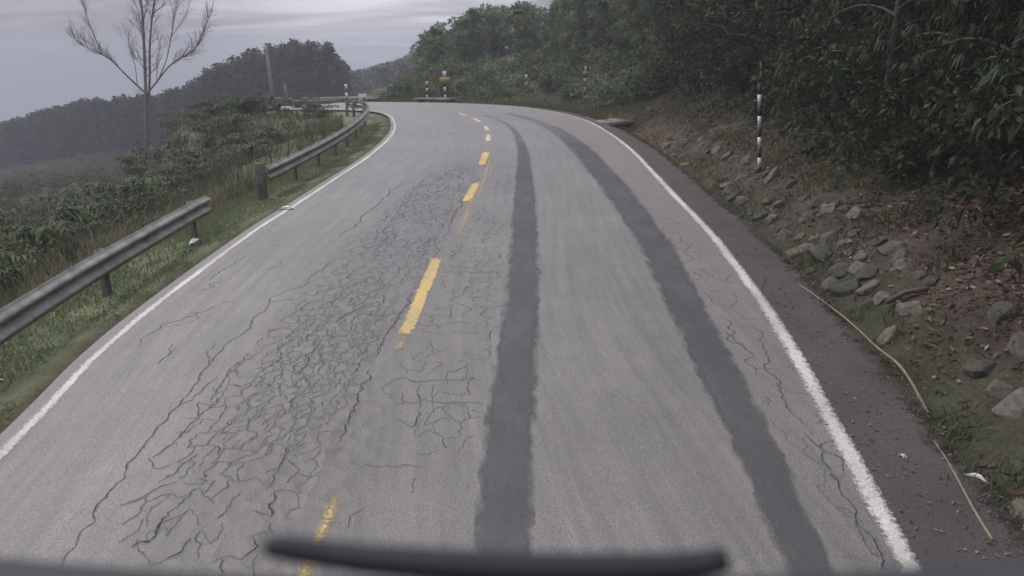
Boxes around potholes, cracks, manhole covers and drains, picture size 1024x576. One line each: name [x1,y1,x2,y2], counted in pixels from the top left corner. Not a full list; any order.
crack [62,156,512,575]
crack [660,217,887,569]
